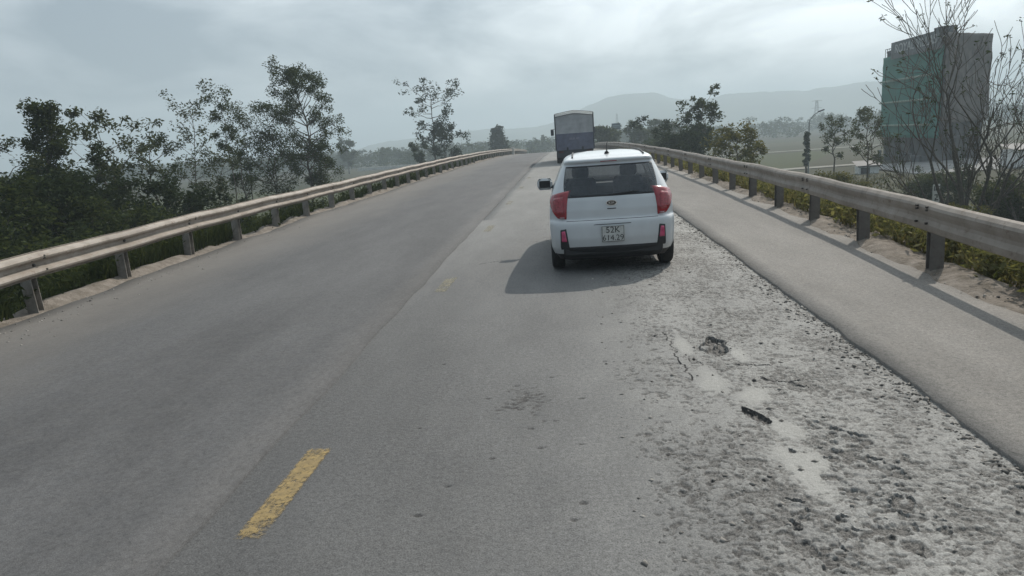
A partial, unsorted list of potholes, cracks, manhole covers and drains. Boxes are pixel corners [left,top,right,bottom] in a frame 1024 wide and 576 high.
pothole [698,336,729,357]
crack [662,332,704,381]
pothole [741,406,772,425]
